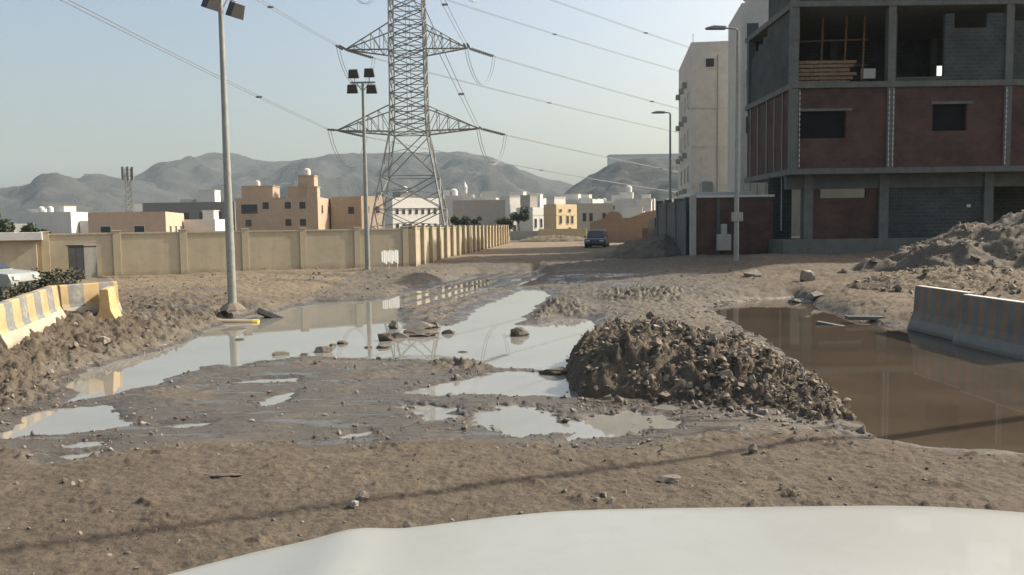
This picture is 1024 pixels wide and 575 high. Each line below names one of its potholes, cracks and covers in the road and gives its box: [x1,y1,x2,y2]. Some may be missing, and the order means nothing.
pothole [226,375,307,383]
pothole [647,412,688,429]
pothole [462,402,657,444]
pothole [0,401,140,439]
pothole [396,369,594,399]
pothole [247,389,305,407]
